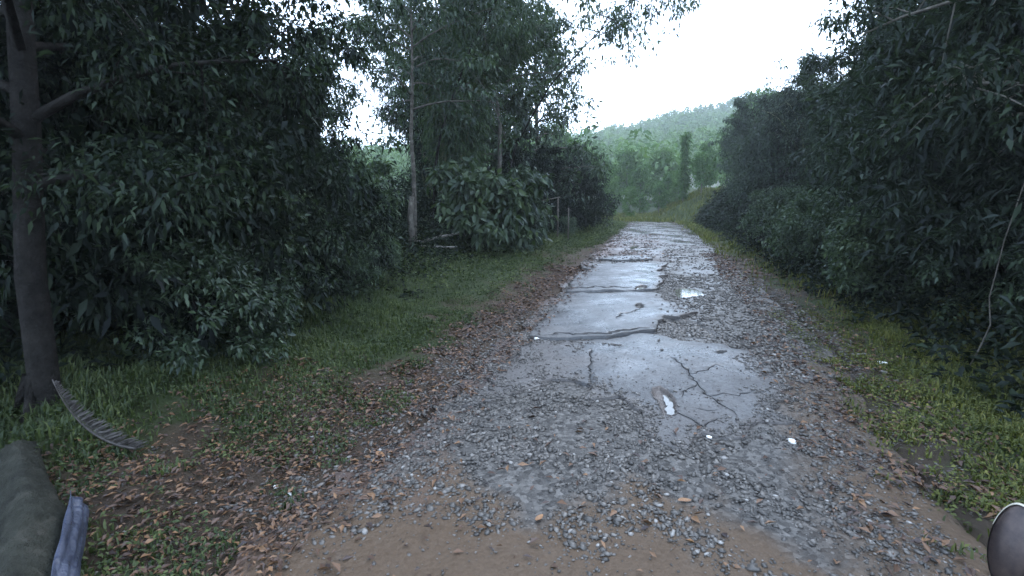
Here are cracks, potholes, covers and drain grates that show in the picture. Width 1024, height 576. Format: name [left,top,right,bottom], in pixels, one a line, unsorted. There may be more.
pothole [651,385,678,417]
crack [671,357,749,432]
